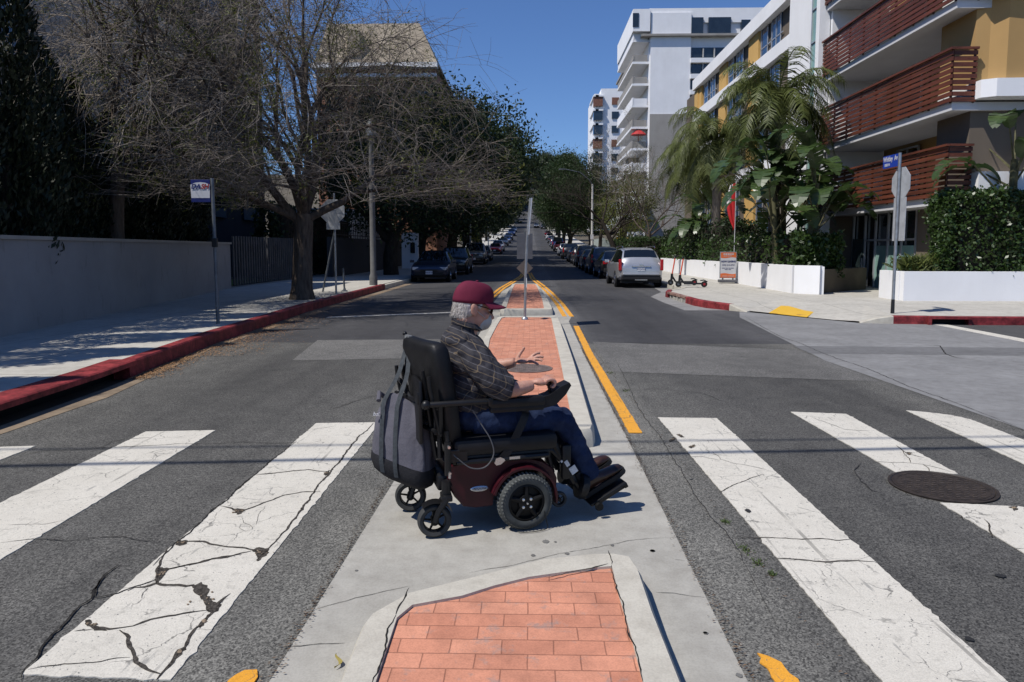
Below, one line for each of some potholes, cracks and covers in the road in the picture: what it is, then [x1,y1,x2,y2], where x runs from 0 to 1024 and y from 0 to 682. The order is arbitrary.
crack [854,445,948,492]
manhole cover [887,470,1000,504]
manhole cover [507,364,552,373]
crack [693,440,762,492]
drain grate [926,316,972,325]
